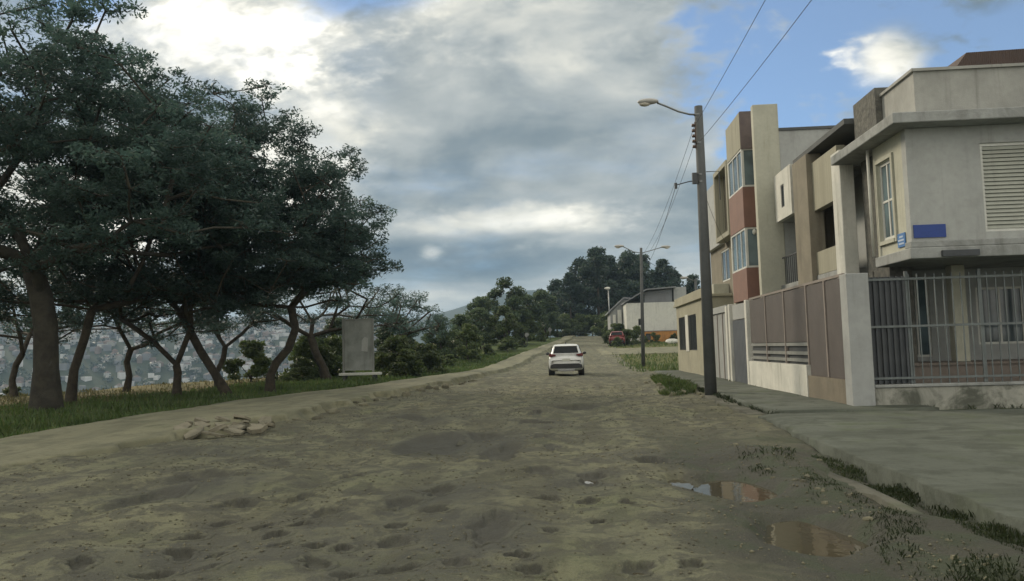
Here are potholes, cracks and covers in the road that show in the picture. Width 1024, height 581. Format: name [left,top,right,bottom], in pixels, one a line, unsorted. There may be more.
pothole [472,440,526,462]
pothole [385,431,475,456]
pothole [572,470,614,489]
pothole [456,431,509,446]
